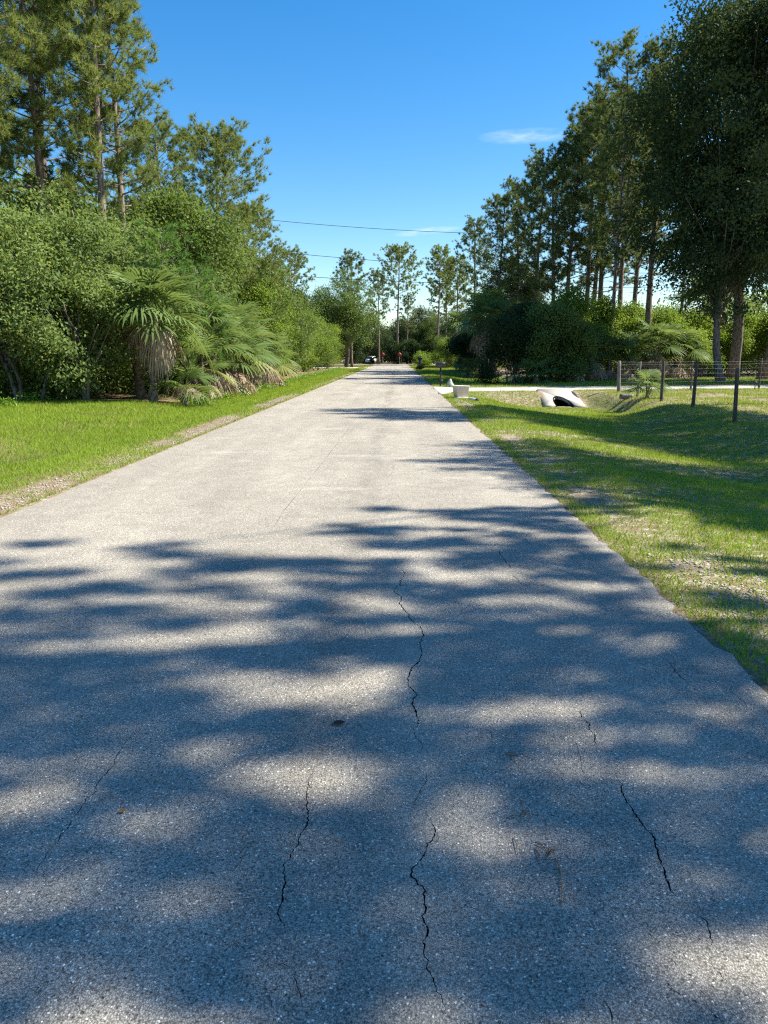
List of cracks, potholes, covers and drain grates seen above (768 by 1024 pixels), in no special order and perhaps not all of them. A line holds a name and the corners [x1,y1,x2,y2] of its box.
crack [276,767,312,1003]
crack [617,777,728,982]
crack [37,732,134,873]
crack [393,561,446,1020]
